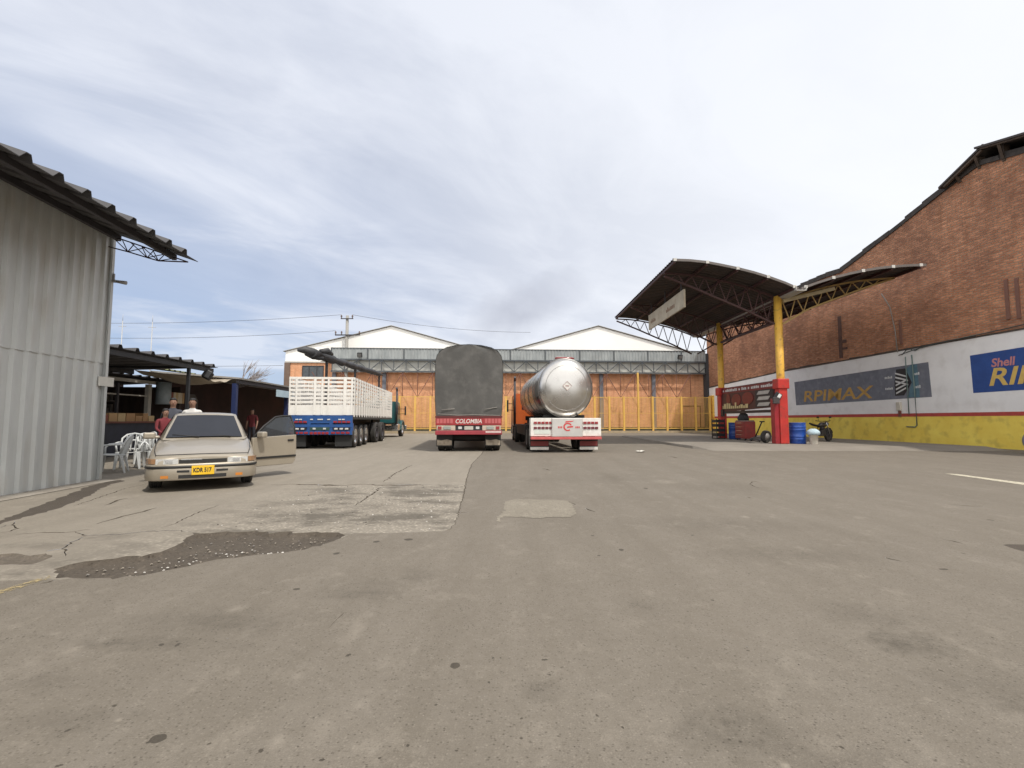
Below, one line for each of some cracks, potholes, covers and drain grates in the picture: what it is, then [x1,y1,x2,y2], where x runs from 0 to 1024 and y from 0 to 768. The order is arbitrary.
pothole [53,531,345,579]
crack [283,465,423,505]
crack [2,484,213,556]
